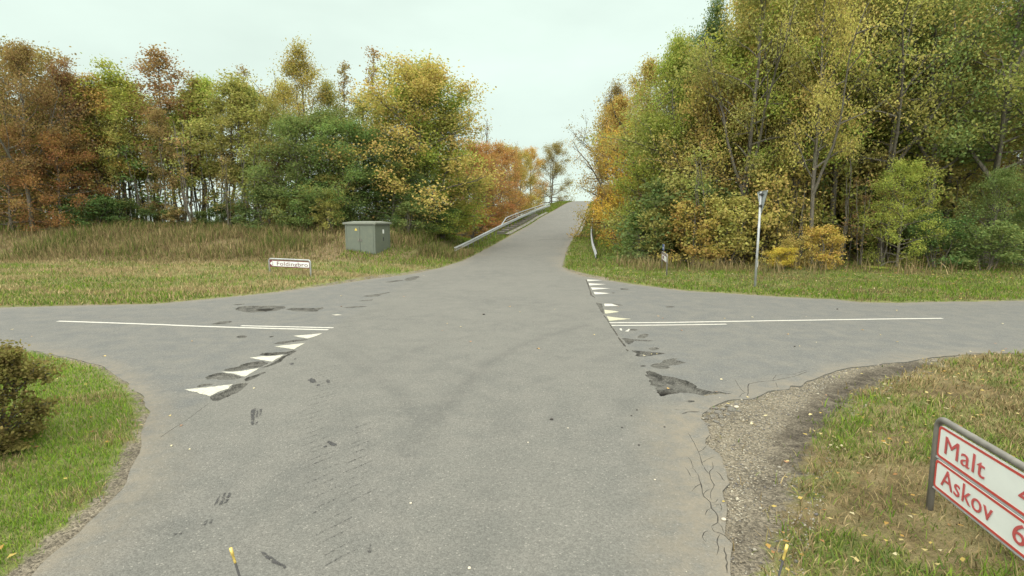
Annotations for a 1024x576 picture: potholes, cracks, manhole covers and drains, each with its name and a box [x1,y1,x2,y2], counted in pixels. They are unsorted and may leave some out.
crack [727,370,806,396]
crack [685,433,729,571]
